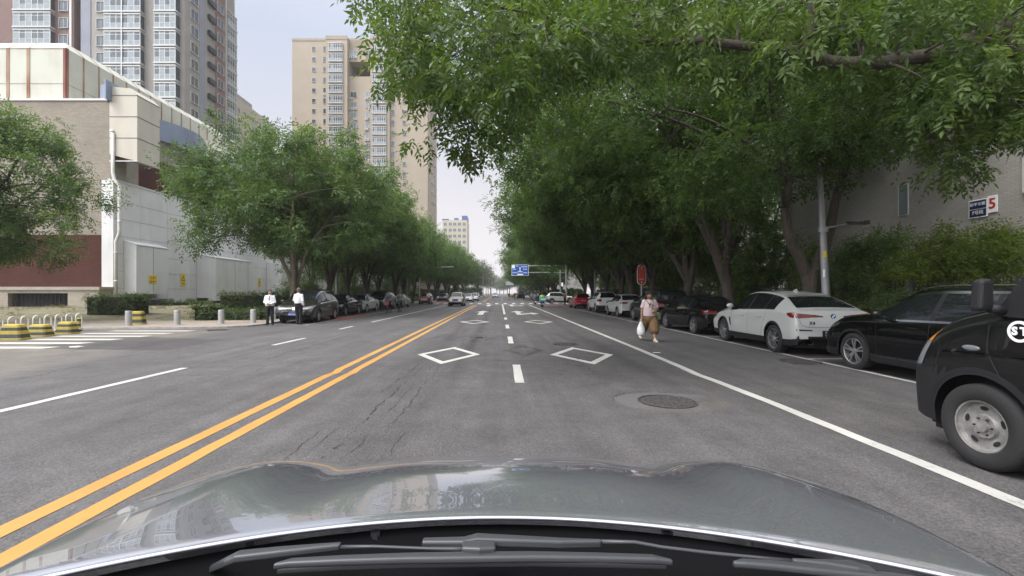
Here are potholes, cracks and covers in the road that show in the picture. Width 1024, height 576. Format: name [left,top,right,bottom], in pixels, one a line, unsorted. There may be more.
manhole cover [637,394,698,408]
